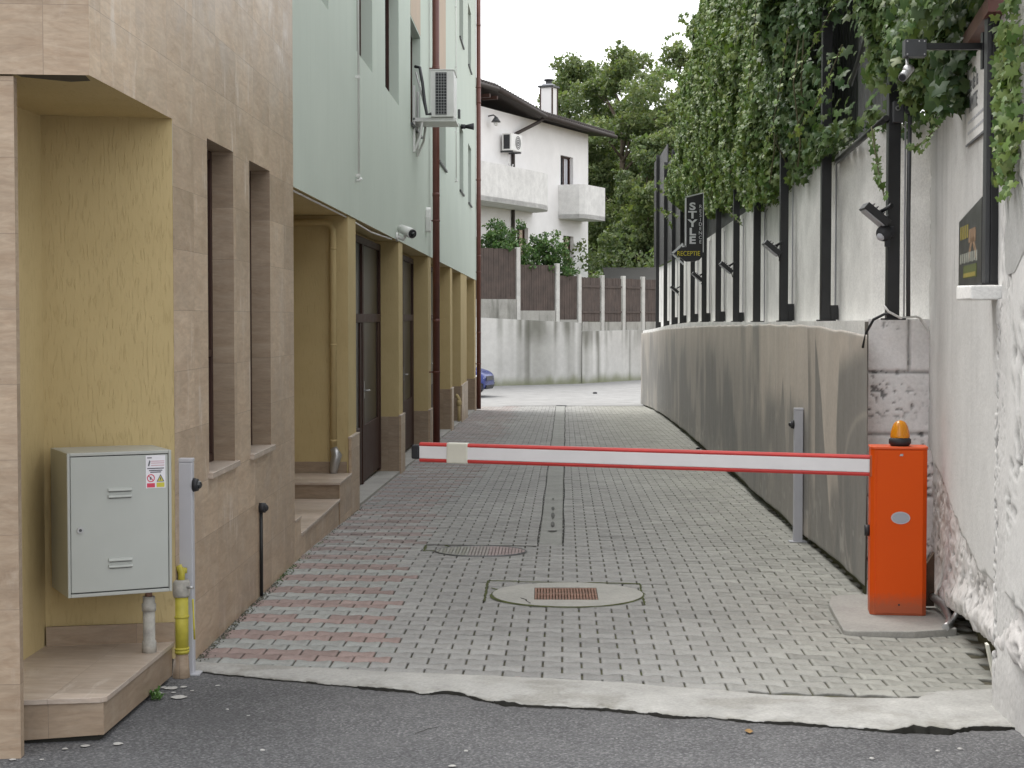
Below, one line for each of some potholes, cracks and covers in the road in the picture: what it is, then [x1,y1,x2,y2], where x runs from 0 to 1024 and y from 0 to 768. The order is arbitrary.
manhole cover [483,580,646,610]
manhole cover [423,545,536,558]
